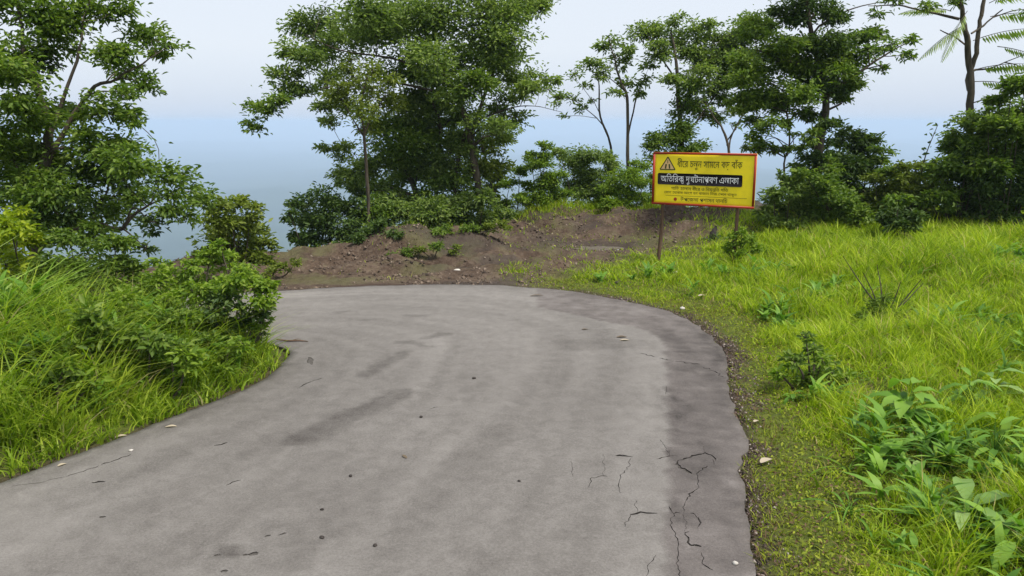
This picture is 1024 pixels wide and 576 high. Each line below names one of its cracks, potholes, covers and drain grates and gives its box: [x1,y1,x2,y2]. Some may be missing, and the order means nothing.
crack [571,440,716,576]
crack [16,454,131,486]
